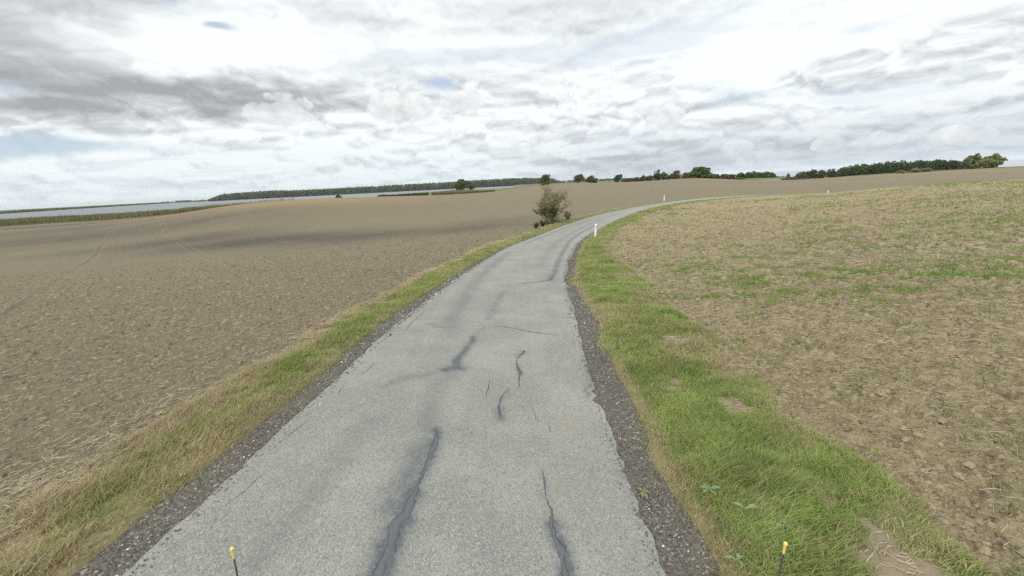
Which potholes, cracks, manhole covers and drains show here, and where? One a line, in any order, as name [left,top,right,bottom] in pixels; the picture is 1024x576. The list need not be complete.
crack [542,470,569,576]
crack [485,326,556,431]
crack [372,431,439,576]
